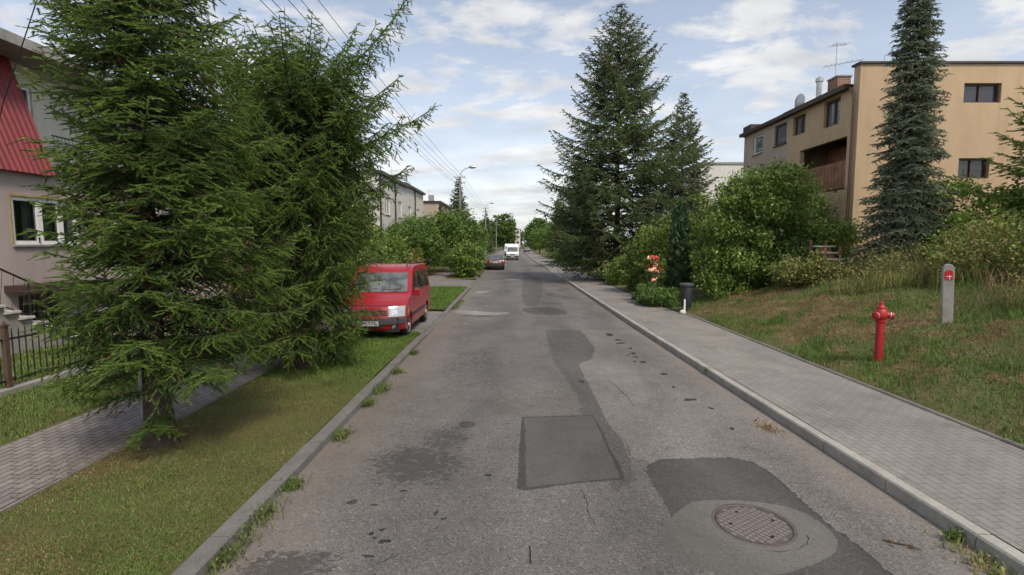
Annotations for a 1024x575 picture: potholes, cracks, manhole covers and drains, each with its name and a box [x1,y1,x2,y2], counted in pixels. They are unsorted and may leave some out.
manhole cover [711,504,798,547]
